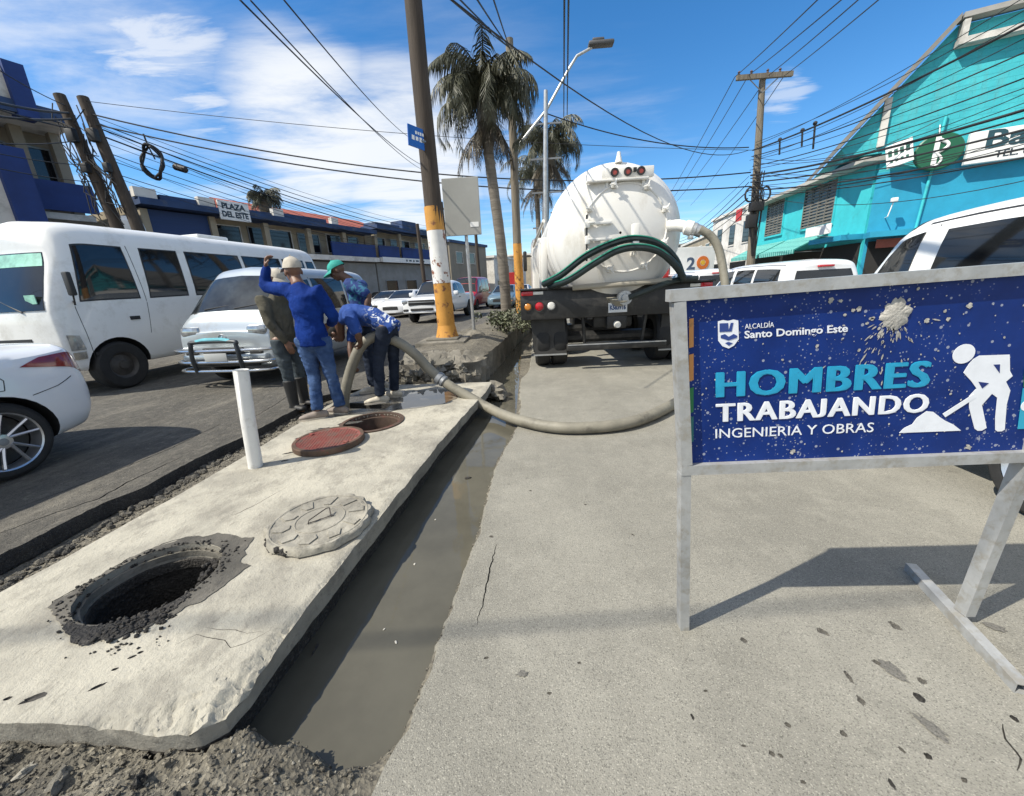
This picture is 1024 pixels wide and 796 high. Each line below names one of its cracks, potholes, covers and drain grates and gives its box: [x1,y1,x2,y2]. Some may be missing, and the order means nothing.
manhole cover [339,412,404,433]
crack [1002,724,1022,771]
crack [192,627,265,648]
crack [477,547,496,625]
manhole cover [291,426,365,457]
manhole cover [263,493,375,558]
